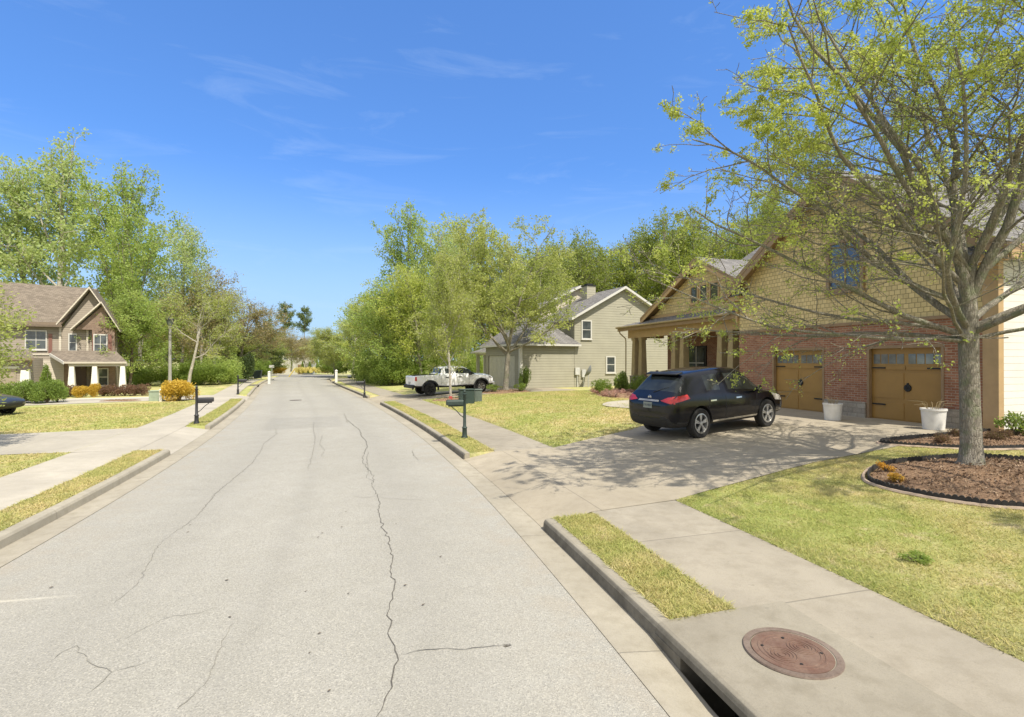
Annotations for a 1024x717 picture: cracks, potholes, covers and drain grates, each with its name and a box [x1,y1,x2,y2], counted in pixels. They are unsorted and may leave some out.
manhole cover [742,627,845,680]
crack [52,610,206,693]
crack [115,428,278,602]
crack [344,413,497,714]
crack [178,622,235,708]
